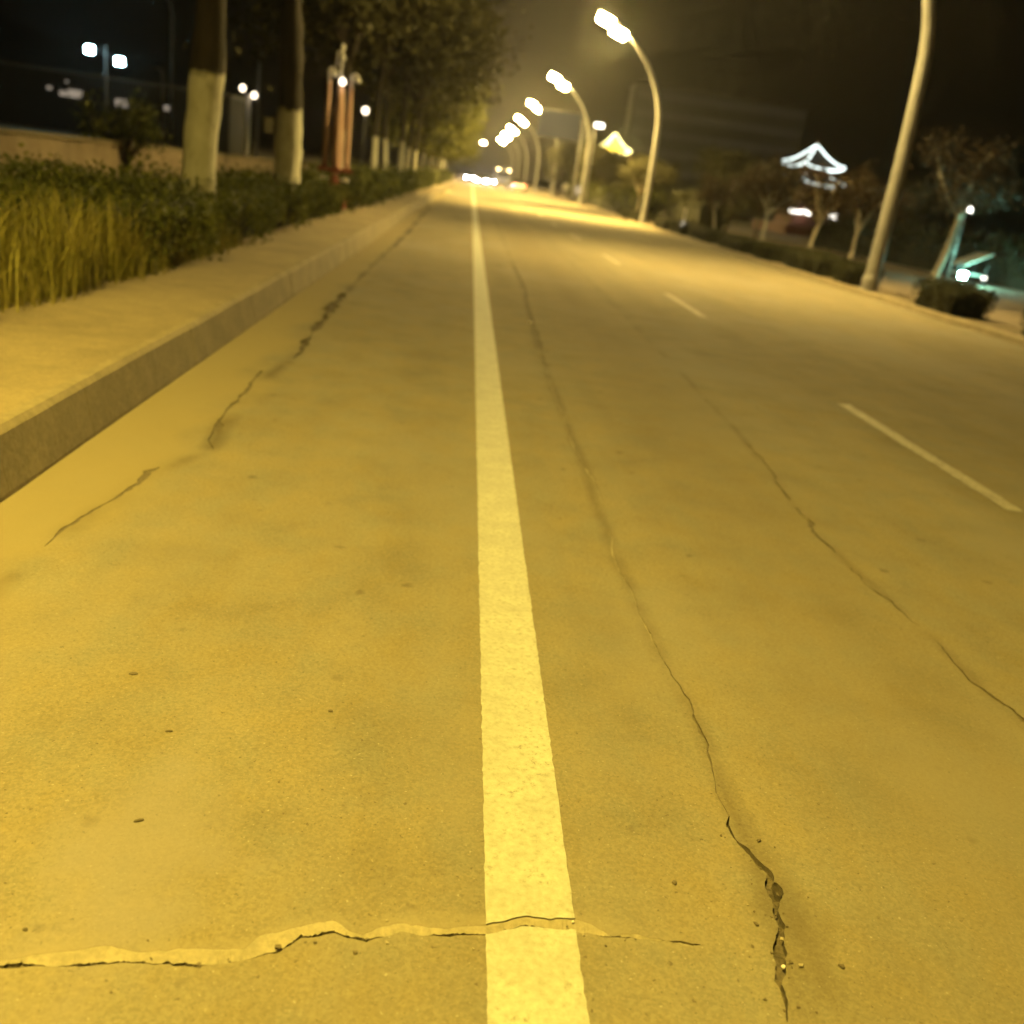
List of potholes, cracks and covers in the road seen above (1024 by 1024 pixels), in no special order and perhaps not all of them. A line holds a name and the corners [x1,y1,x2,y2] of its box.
crack [514,267,788,1022]
crack [747,443,1024,723]
crack [0,917,700,969]
